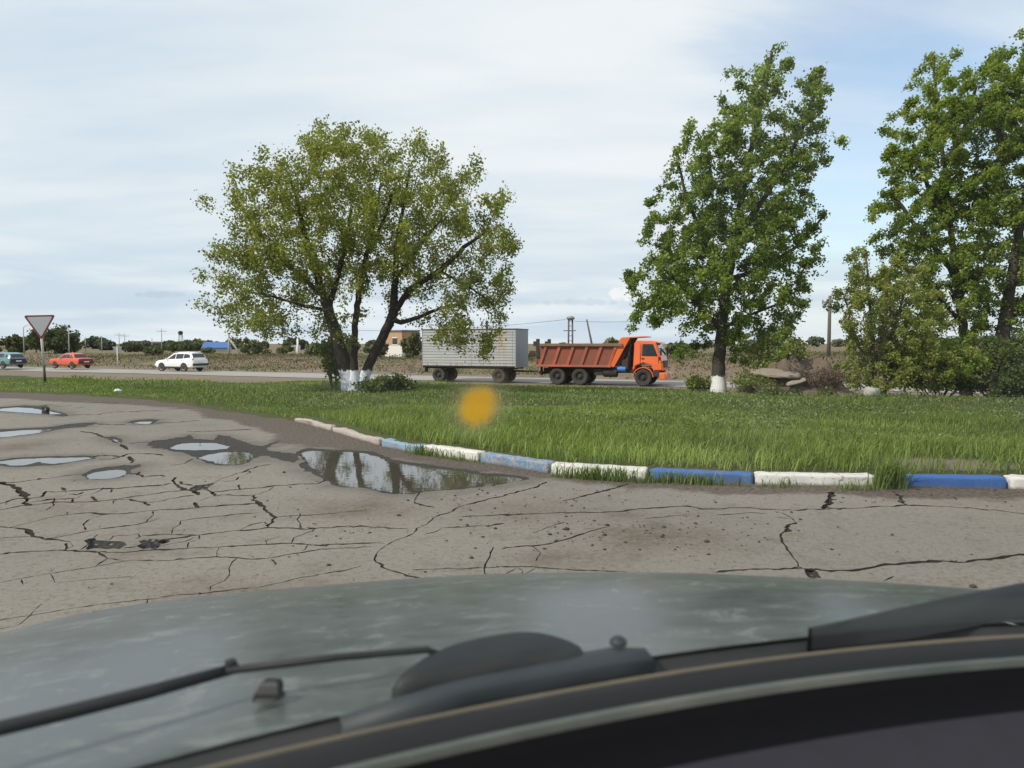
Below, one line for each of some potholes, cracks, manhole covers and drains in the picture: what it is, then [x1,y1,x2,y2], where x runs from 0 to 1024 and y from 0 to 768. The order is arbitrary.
pothole [0,455,96,467]
pothole [137,539,170,550]
pothole [85,538,127,550]
pothole [146,435,300,465]
pothole [296,448,529,494]
pothole [81,464,141,480]
pothole [0,422,98,437]
pothole [0,405,68,417]
crack [0,402,1024,629]
